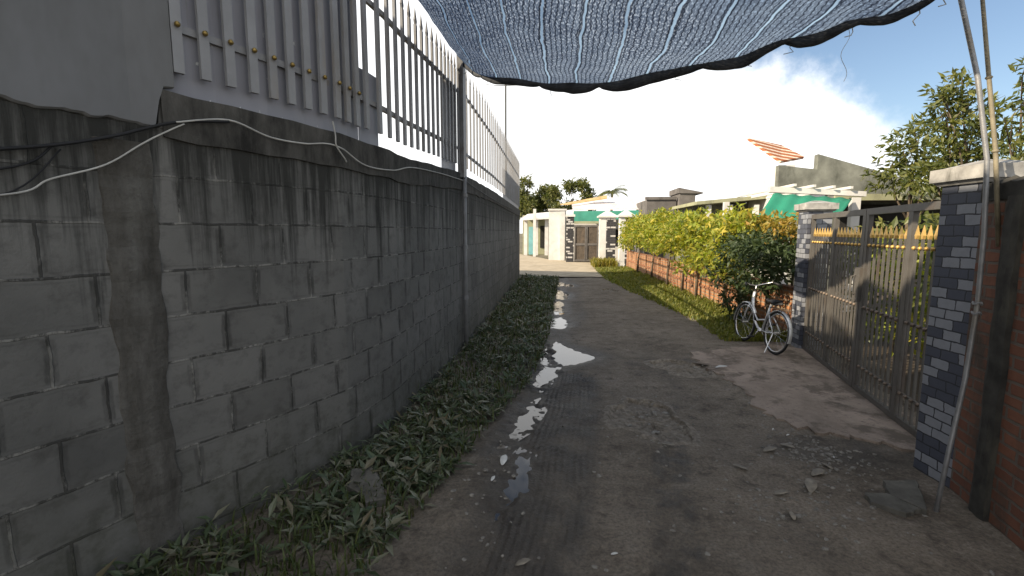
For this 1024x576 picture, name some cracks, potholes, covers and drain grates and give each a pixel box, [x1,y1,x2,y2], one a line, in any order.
pothole [600,395,705,447]
